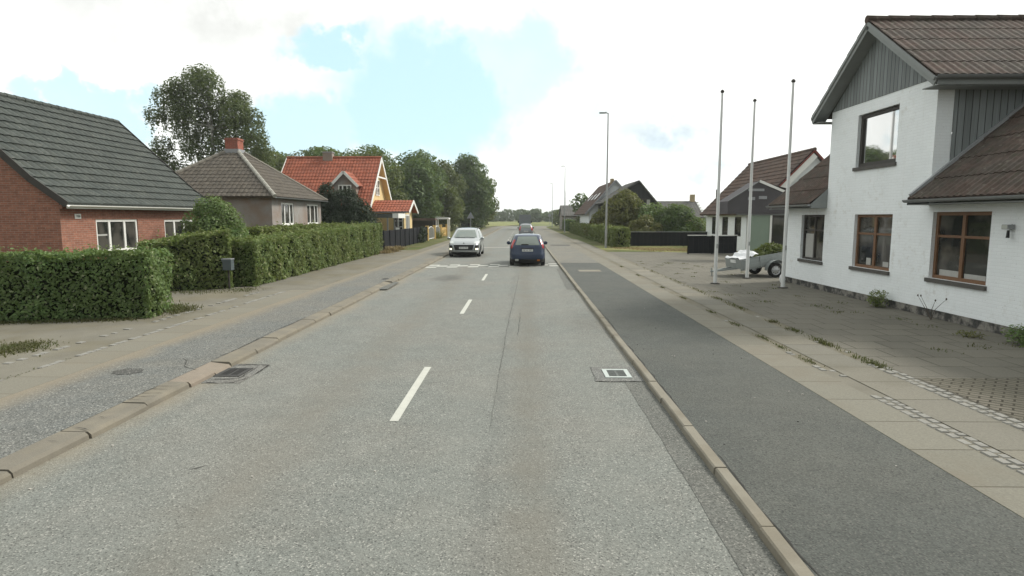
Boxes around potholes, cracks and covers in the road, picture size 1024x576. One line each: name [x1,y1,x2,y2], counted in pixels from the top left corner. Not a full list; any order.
drain grate [213,368,254,377]
crack [489,276,521,429]
crack [183,318,303,383]
